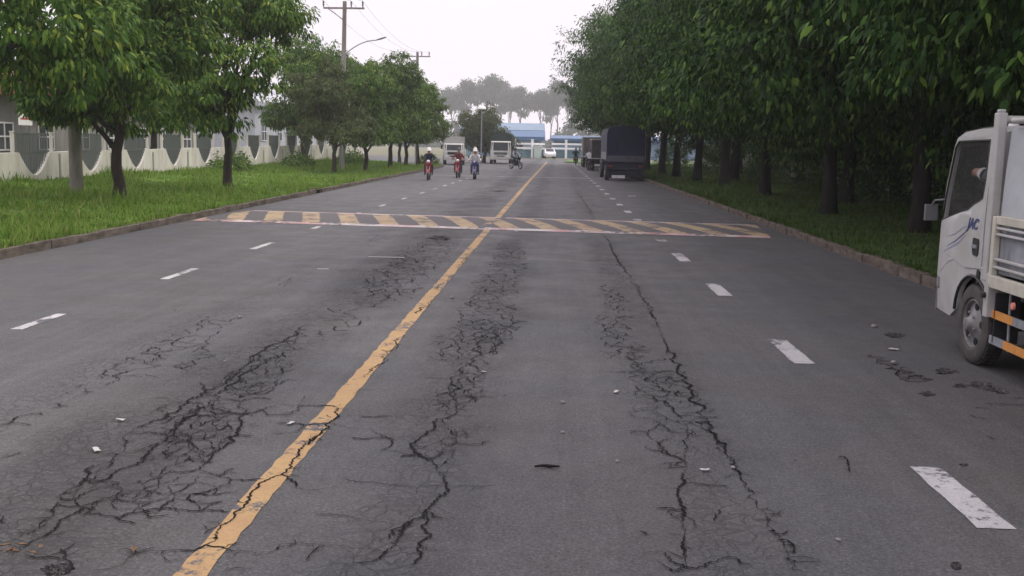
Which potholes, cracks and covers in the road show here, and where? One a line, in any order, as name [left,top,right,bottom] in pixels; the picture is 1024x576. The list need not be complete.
crack [594,238,819,572]
pothole [867,355,934,382]
pothole [971,381,1010,394]
crack [0,234,528,572]
